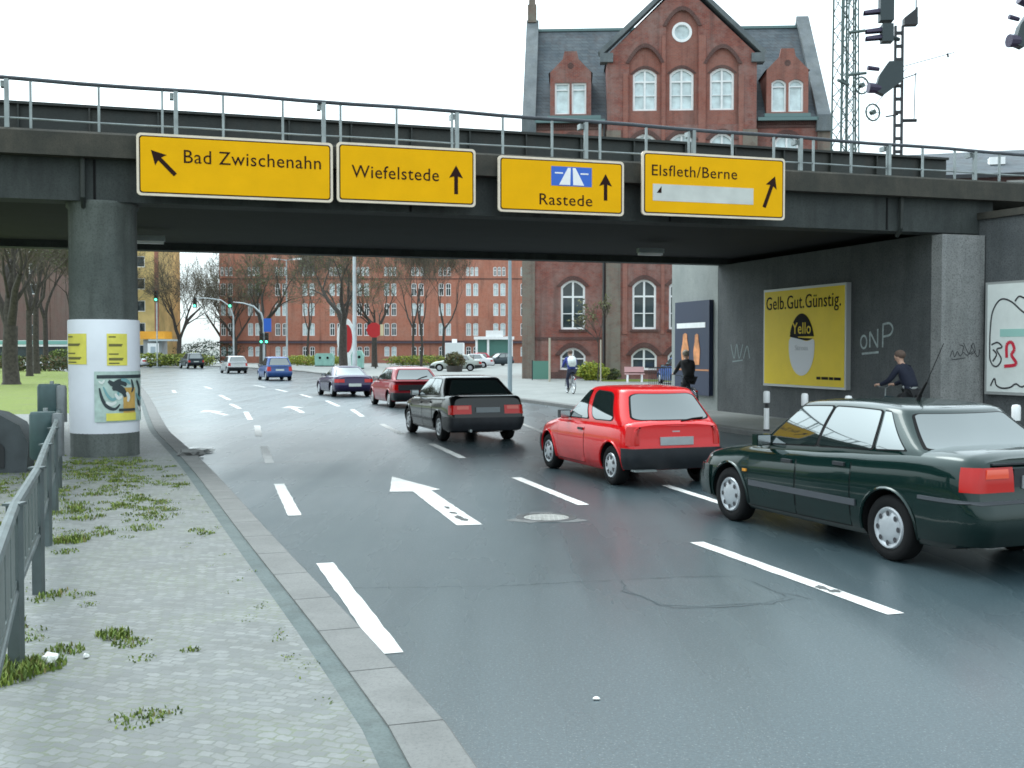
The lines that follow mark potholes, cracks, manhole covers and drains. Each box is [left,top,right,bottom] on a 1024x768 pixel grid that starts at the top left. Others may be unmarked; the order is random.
manhole cover [506,512,587,523]
